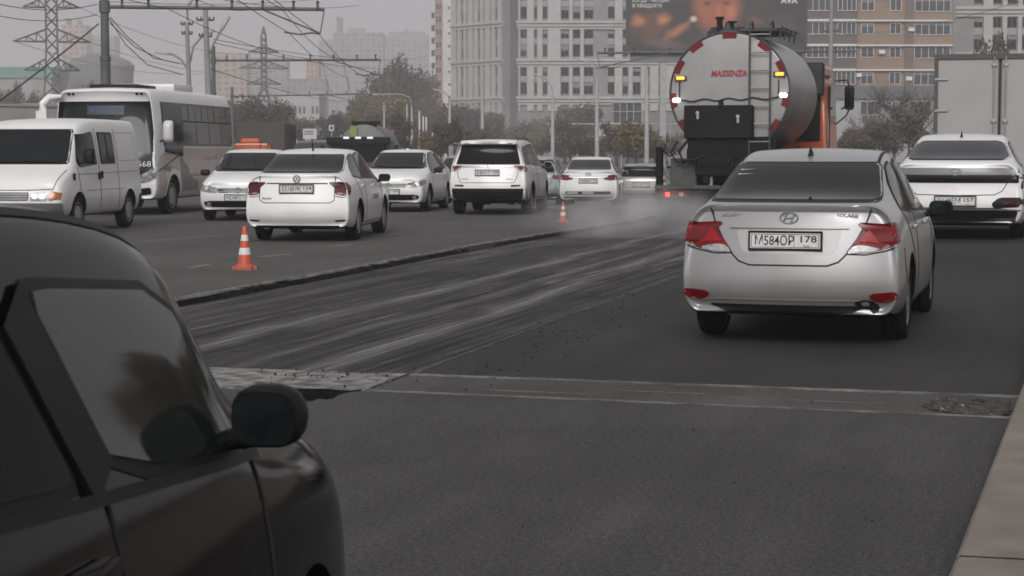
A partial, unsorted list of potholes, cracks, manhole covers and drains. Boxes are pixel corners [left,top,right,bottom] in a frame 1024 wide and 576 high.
pothole [295,388,361,402]
